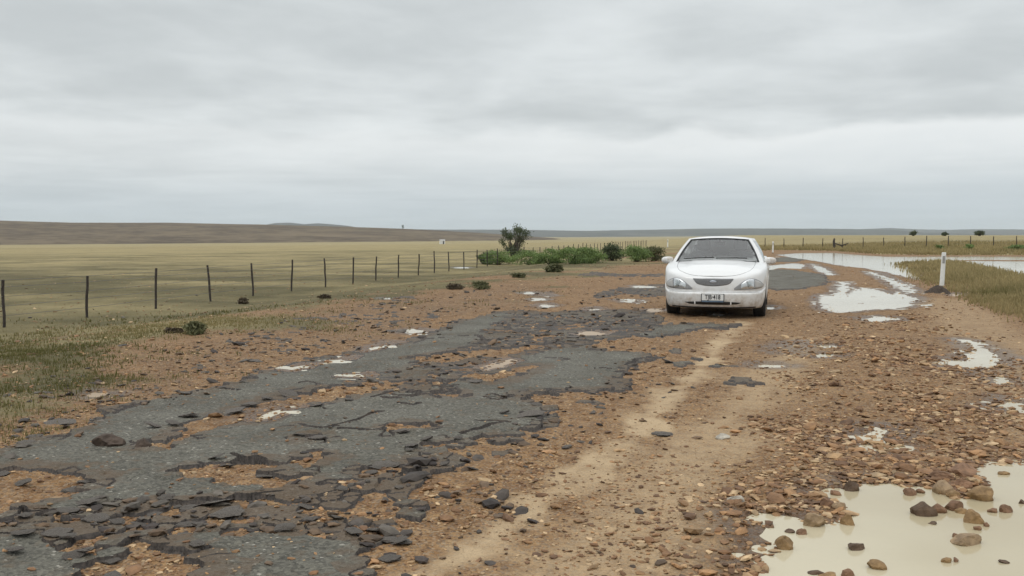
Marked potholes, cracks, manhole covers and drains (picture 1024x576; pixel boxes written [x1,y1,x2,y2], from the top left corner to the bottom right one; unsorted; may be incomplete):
crack [0,467,428,553]
pothole [931,338,1023,376]
crack [230,380,320,465]
crack [279,319,653,433]
pothole [714,458,1024,576]
pothole [854,315,907,323]
pothole [809,281,936,313]
